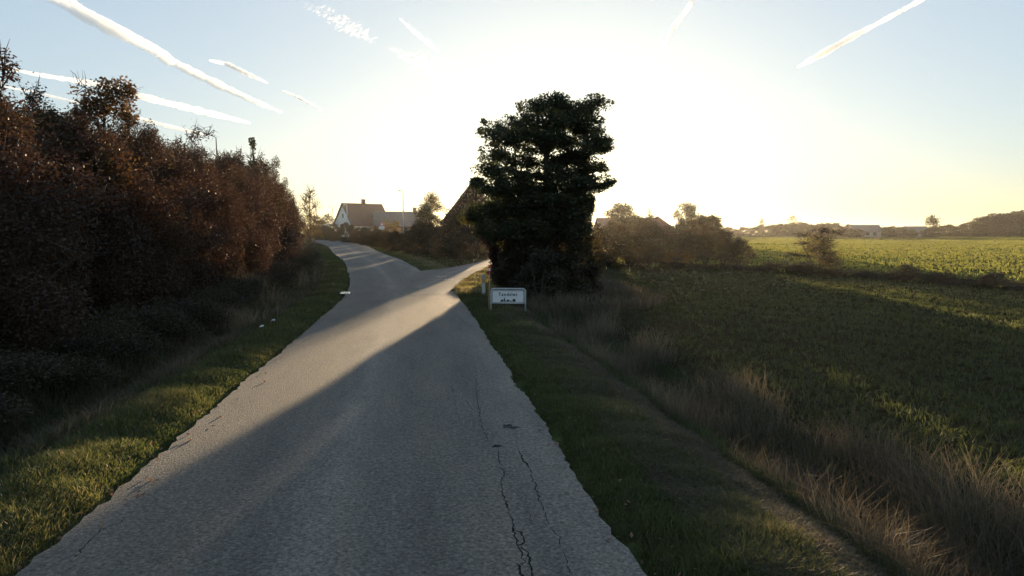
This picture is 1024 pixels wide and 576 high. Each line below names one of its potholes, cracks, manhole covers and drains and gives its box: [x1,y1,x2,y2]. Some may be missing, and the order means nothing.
crack [452,364,572,576]
